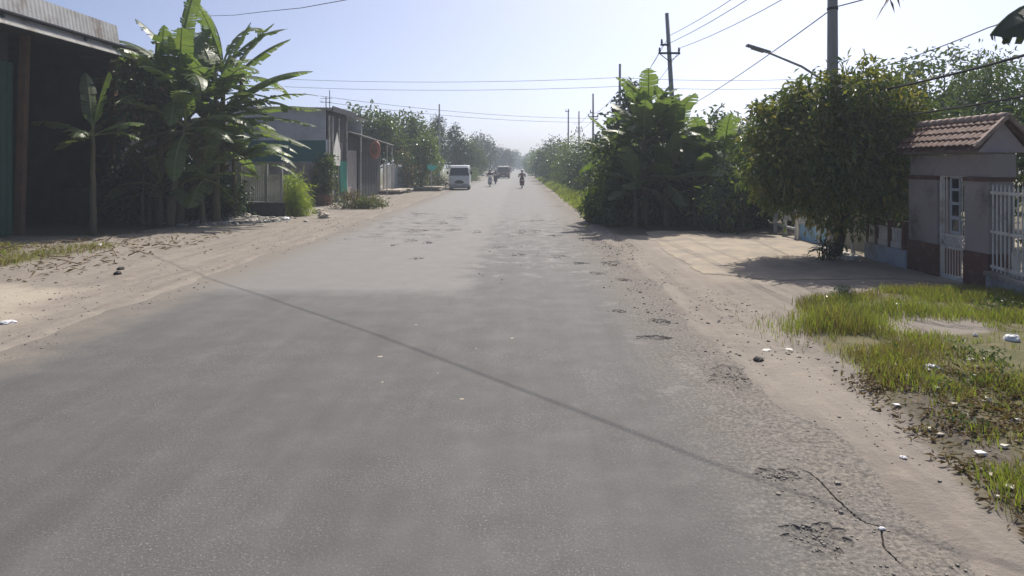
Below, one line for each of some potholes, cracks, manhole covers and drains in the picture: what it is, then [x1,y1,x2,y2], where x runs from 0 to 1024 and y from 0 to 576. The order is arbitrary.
crack [800,469,901,564]
pothole [778,521,854,560]
pothole [752,467,802,483]
pothole [707,364,753,391]
